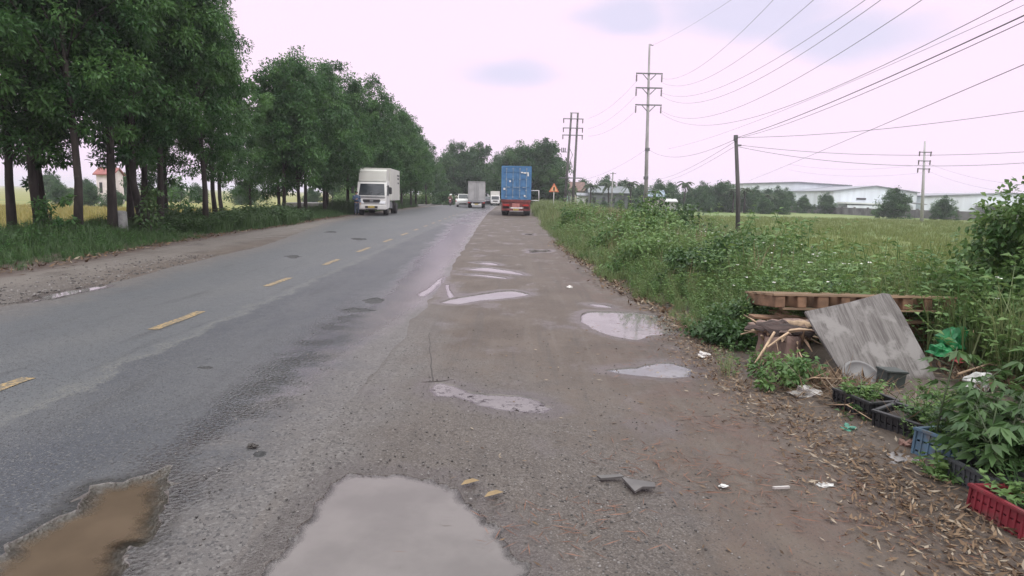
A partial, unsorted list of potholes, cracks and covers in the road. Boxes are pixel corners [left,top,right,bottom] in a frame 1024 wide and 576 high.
pothole [0,465,182,576]
pothole [428,382,554,414]
pothole [439,290,529,304]
pothole [605,362,692,378]
pothole [259,472,532,576]
pothole [469,267,524,275]
pothole [580,311,686,340]
crack [426,333,454,382]
